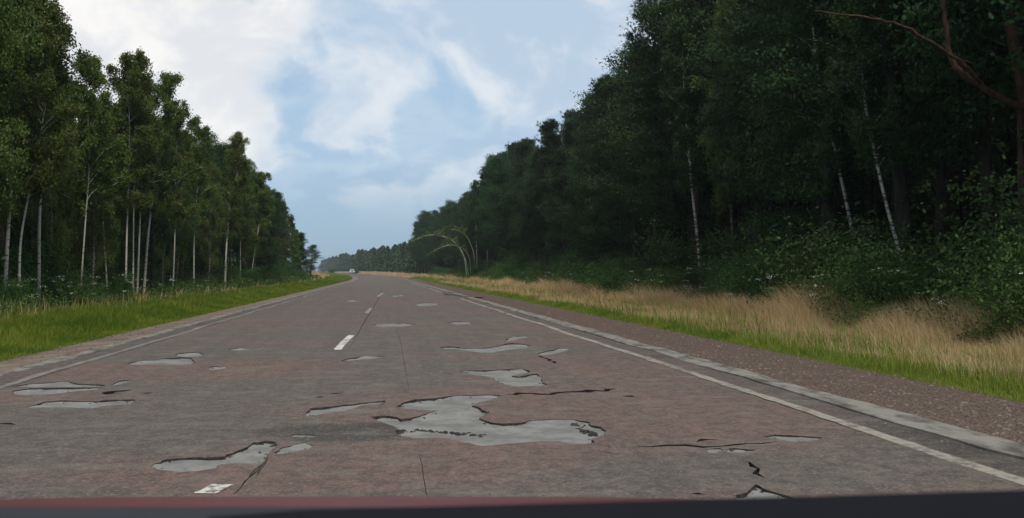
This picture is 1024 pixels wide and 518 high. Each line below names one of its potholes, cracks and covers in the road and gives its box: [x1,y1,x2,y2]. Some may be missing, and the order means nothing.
crack [638,439,777,478]
pothole [12,387,102,395]
pothole [150,441,277,472]
pothole [305,400,386,417]
pothole [26,400,135,408]
pothole [441,343,529,353]
pothole [459,369,548,386]
pothole [127,357,195,365]
pothole [735,484,790,498]
pothole [371,395,606,446]
